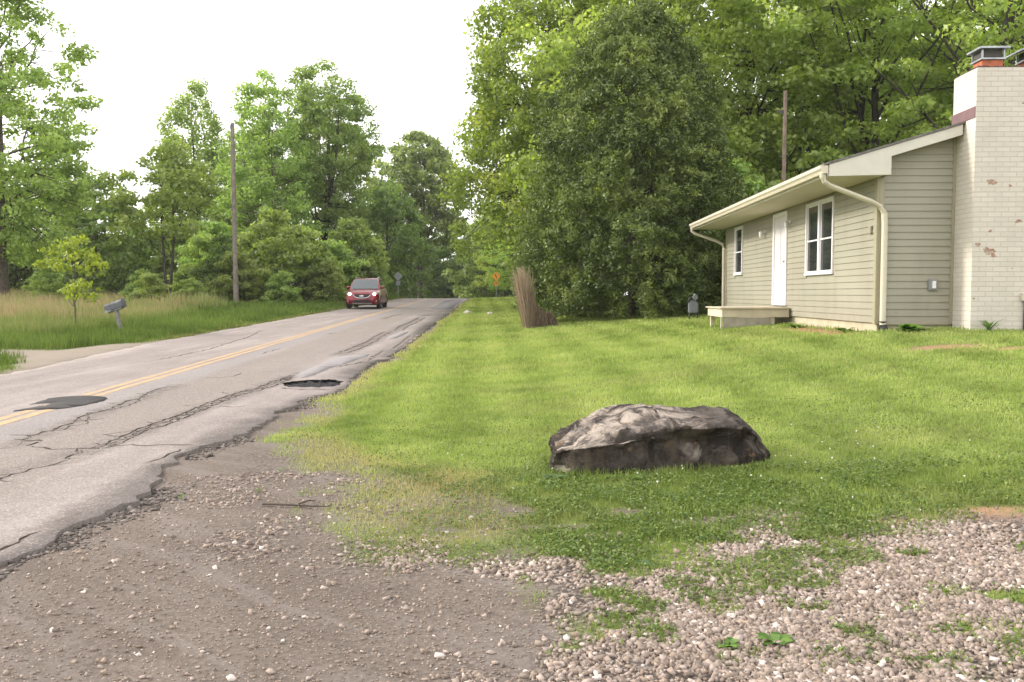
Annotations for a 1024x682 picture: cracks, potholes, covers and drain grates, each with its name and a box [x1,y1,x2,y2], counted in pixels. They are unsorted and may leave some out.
crack [330,314,424,368]
pothole [283,379,344,389]
crack [0,371,330,482]
